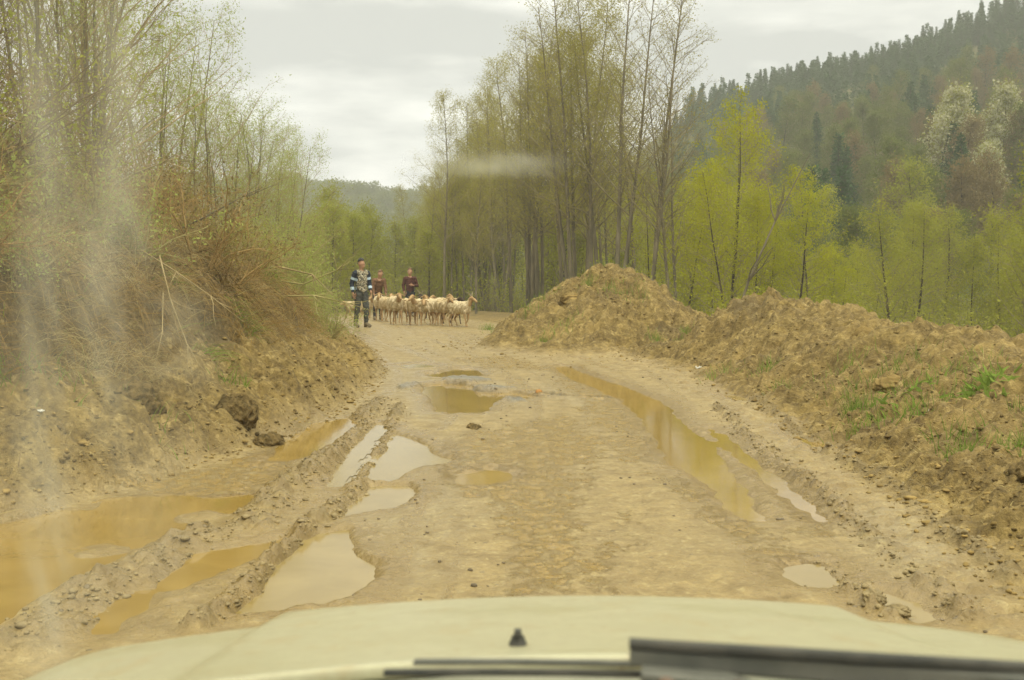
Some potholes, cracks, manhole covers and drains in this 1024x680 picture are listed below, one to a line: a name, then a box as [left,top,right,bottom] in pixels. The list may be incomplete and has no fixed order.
pothole [699,424,845,523]
pothole [334,476,428,516]
pothole [346,429,462,482]
pothole [552,364,782,522]
pothole [417,379,546,413]
pothole [446,463,524,485]
pothole [225,522,395,614]
